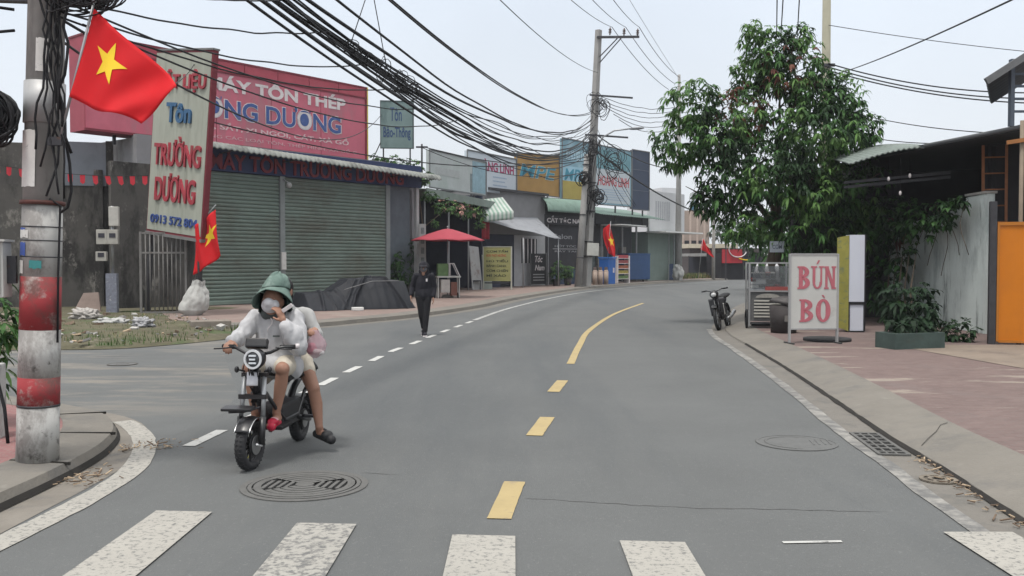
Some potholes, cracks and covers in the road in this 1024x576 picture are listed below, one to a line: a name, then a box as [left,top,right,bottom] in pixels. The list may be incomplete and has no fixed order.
drain grate [849,432,911,456]
manhole cover [755,435,839,451]
crack [529,498,887,512]
manhole cover [239,470,368,502]
manhole cover [919,474,958,484]
